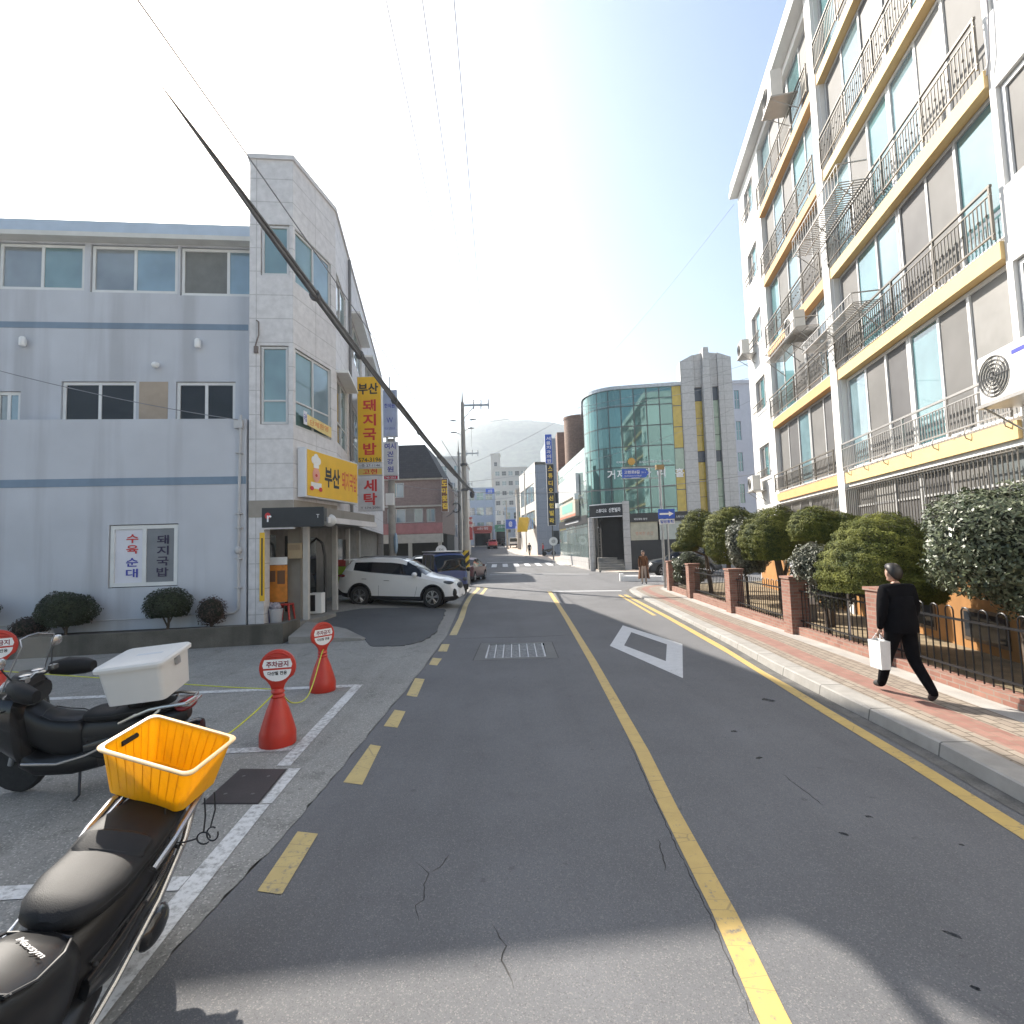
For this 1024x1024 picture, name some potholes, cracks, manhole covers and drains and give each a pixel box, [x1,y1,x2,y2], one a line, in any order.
manhole cover [202,769,287,805]
crack [415,855,449,920]
crack [492,924,514,988]
drain grate [472,641,559,661]
